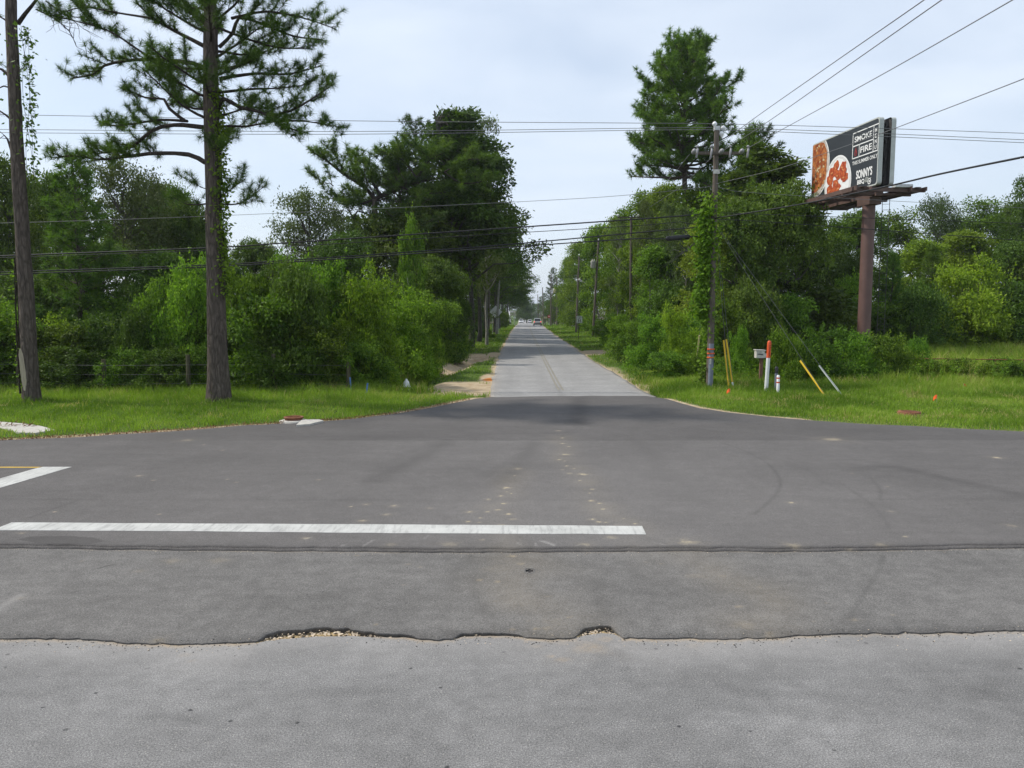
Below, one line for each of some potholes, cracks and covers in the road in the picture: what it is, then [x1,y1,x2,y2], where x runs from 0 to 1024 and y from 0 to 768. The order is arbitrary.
manhole cover [279,415,307,424]
pothole [256,630,392,643]
pothole [577,629,616,637]
